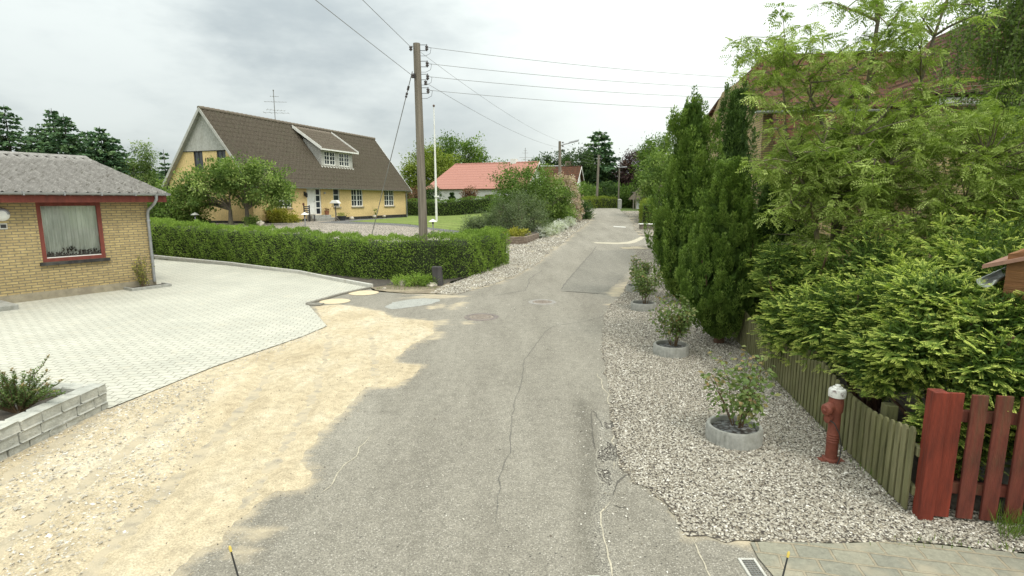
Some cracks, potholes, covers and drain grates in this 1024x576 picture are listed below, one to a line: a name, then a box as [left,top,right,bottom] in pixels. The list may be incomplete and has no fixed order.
crack [324,434,372,491]
manhole cover [464,313,499,321]
crack [591,374,628,576]
drain grate [738,558,767,576]
